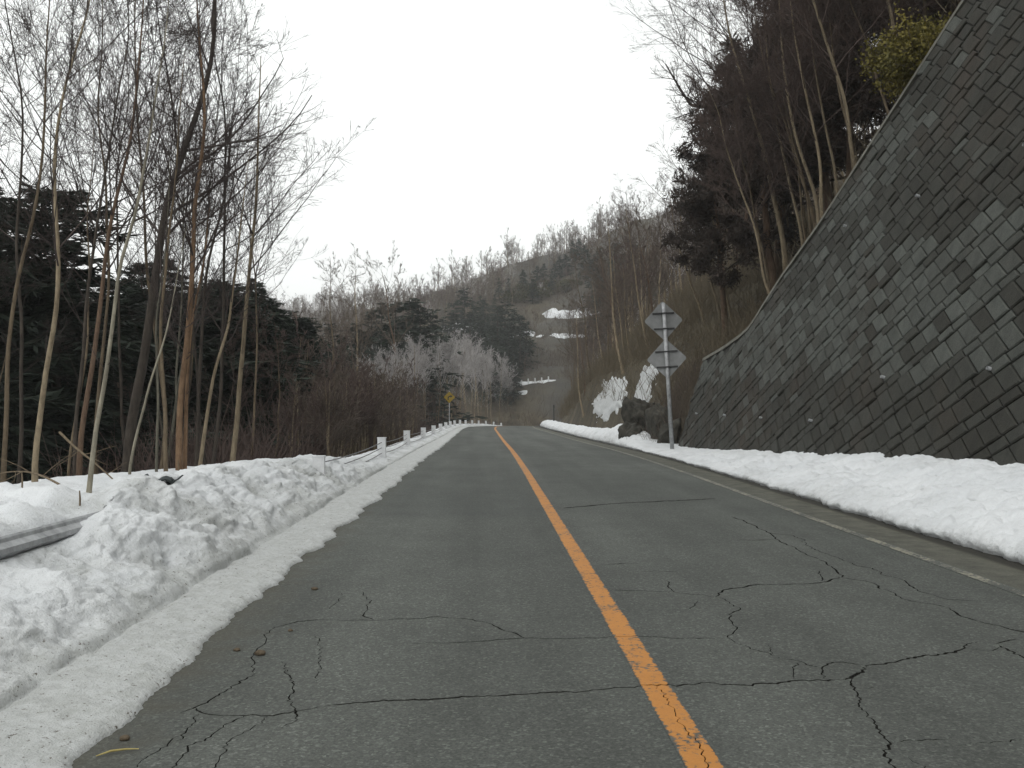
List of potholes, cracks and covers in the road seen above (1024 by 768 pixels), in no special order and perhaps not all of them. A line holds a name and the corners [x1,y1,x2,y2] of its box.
crack [137,599,339,767]
crack [567,499,704,508]
crack [329,517,1024,768]
